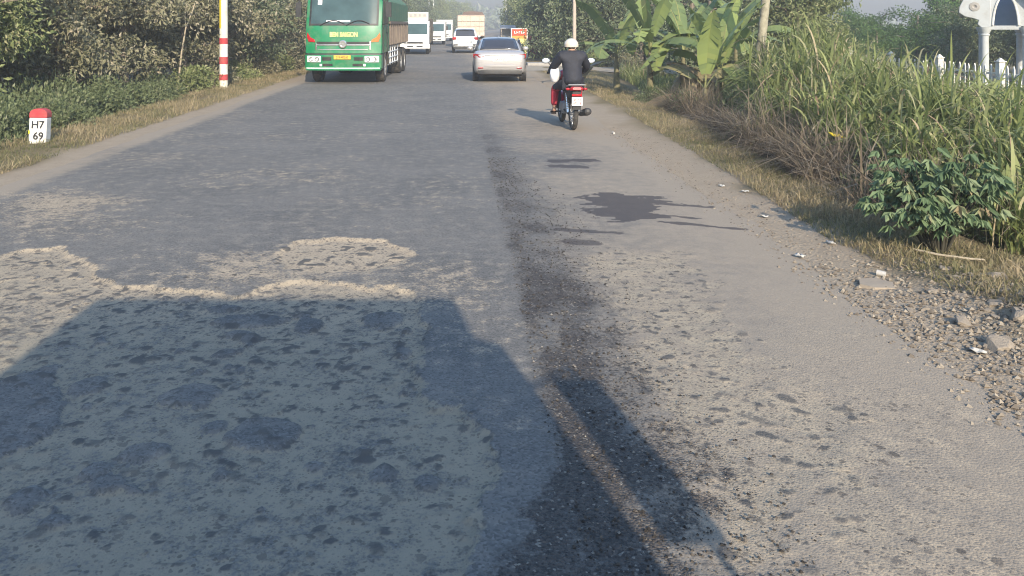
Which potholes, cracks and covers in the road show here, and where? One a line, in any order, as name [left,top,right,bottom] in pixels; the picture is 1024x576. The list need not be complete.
pothole [0,245,506,576]
